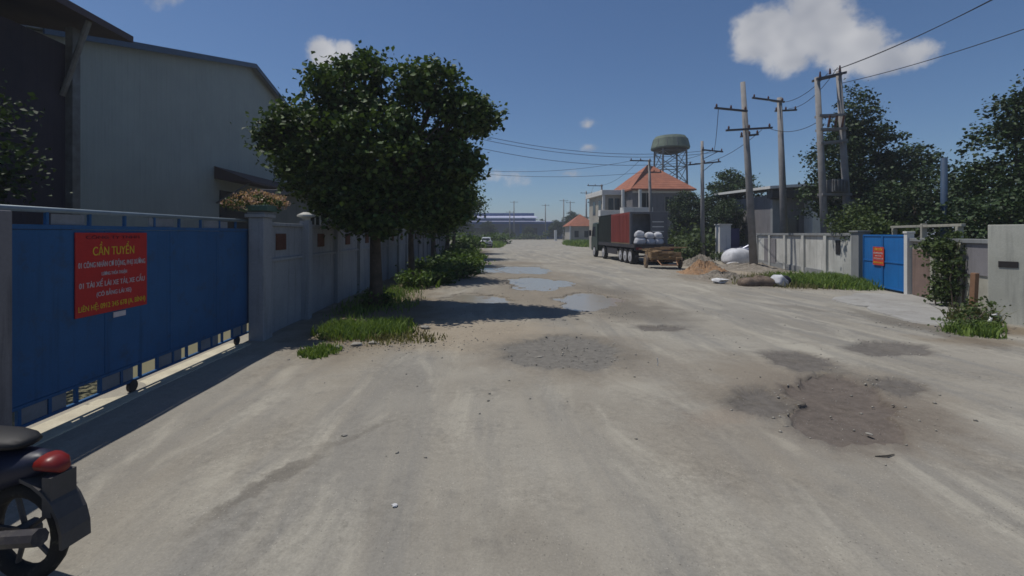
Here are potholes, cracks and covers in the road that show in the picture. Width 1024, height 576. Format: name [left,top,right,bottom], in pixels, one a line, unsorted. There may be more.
pothole [545,291,636,314]
pothole [480,265,558,275]
pothole [765,370,940,464]
pothole [485,332,639,379]
pothole [742,346,859,375]
pothole [502,276,582,293]
pothole [823,338,956,360]
